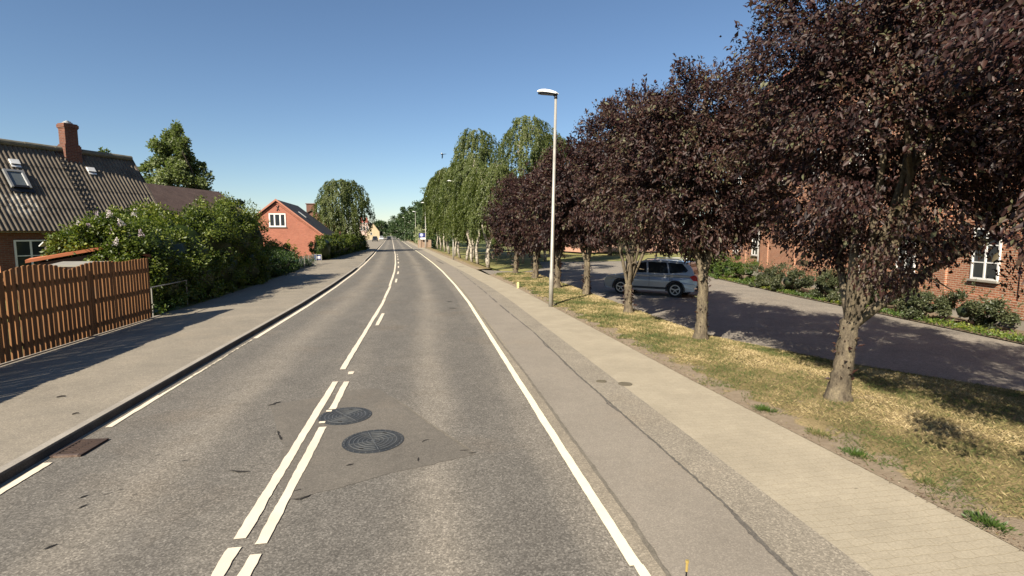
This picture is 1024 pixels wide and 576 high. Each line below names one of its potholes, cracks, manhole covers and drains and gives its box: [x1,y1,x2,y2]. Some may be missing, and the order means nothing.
drain grate [49,438,109,458]
manhole cover [318,407,372,425]
manhole cover [342,430,404,454]
